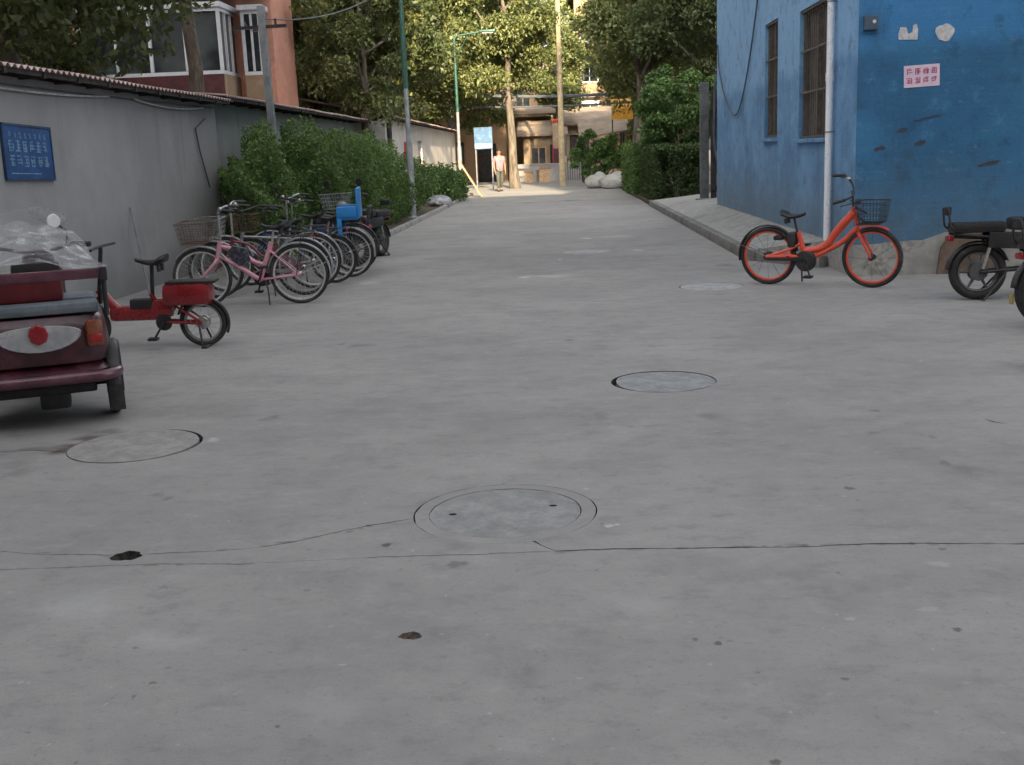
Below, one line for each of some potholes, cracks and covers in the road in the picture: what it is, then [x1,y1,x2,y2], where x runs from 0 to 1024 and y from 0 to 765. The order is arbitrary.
crack [3,519,407,556]
manhole cover [611,371,716,392]
pothole [398,631,422,640]
manhole cover [66,429,203,463]
manhole cover [414,484,597,544]
pothole [110,551,142,561]
